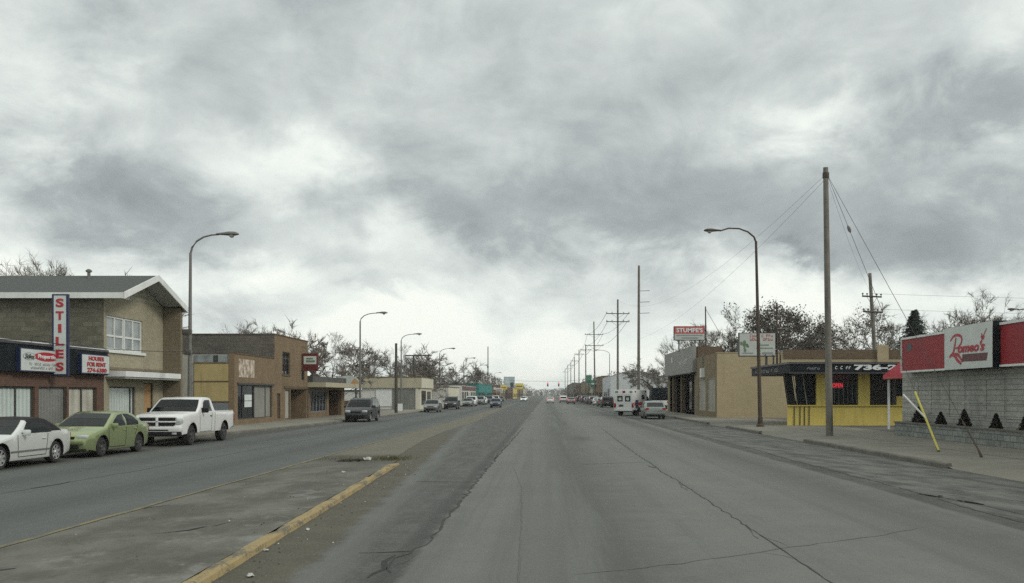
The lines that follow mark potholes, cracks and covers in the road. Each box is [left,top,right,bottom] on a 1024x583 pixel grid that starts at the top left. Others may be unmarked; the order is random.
crack [582,528,916,574]
crack [367,431,523,583]
